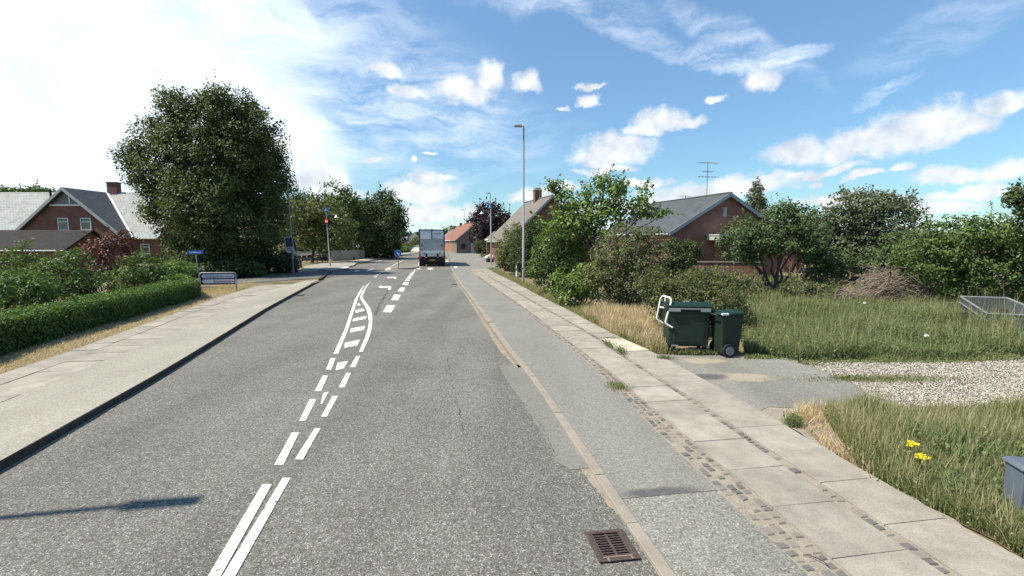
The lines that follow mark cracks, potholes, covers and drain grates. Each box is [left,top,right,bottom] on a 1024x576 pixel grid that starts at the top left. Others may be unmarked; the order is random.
drain grate [584,529,641,563]
